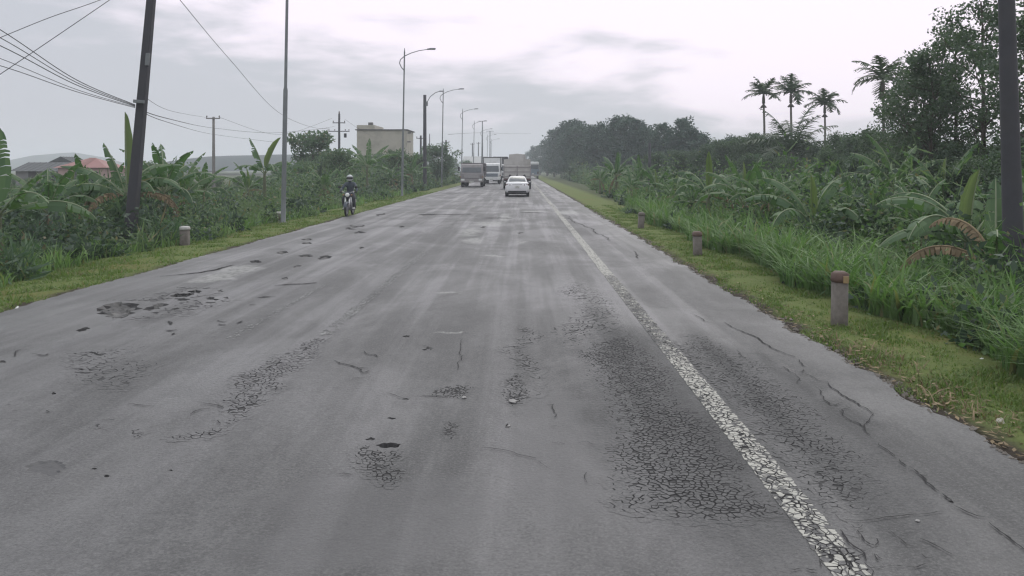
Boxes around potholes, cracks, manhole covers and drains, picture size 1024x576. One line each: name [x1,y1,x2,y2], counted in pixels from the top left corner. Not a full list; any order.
crack [14,285,410,490]
pothole [97,302,143,318]
crack [491,280,1024,575]
